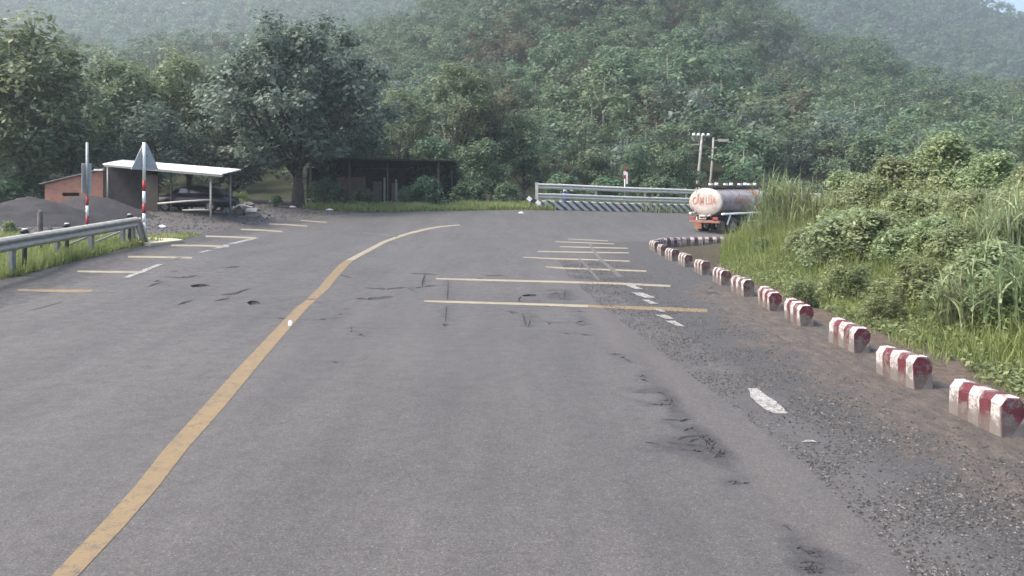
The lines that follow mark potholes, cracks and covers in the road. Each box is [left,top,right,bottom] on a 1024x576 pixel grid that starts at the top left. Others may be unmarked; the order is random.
crack [508,290,592,336]
crack [216,289,248,301]
crack [782,525,826,574]
crack [612,354,728,458]
crack [320,273,449,337]
